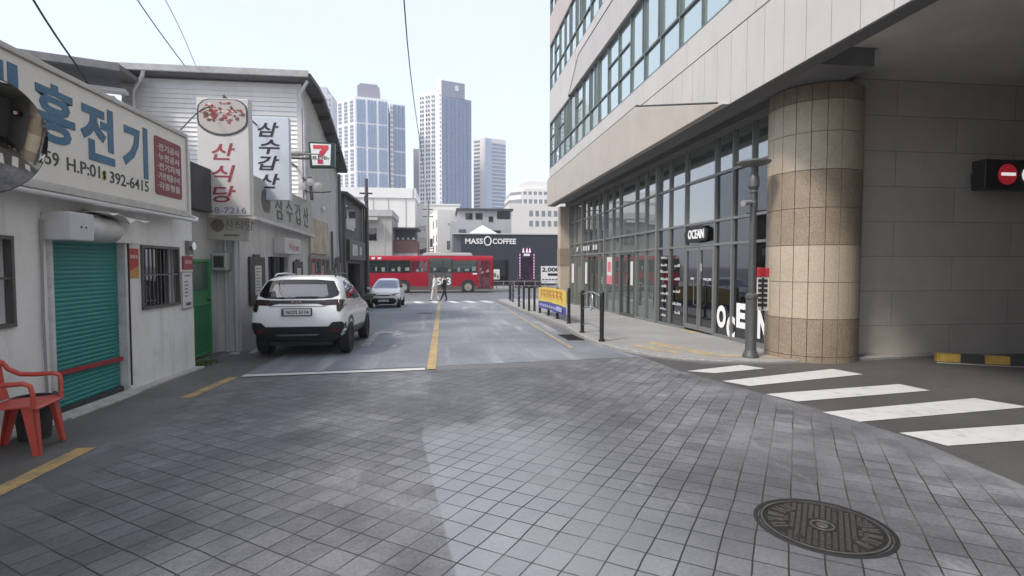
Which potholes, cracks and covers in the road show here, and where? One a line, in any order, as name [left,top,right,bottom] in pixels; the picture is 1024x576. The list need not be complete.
manhole cover [753,498,900,559]
